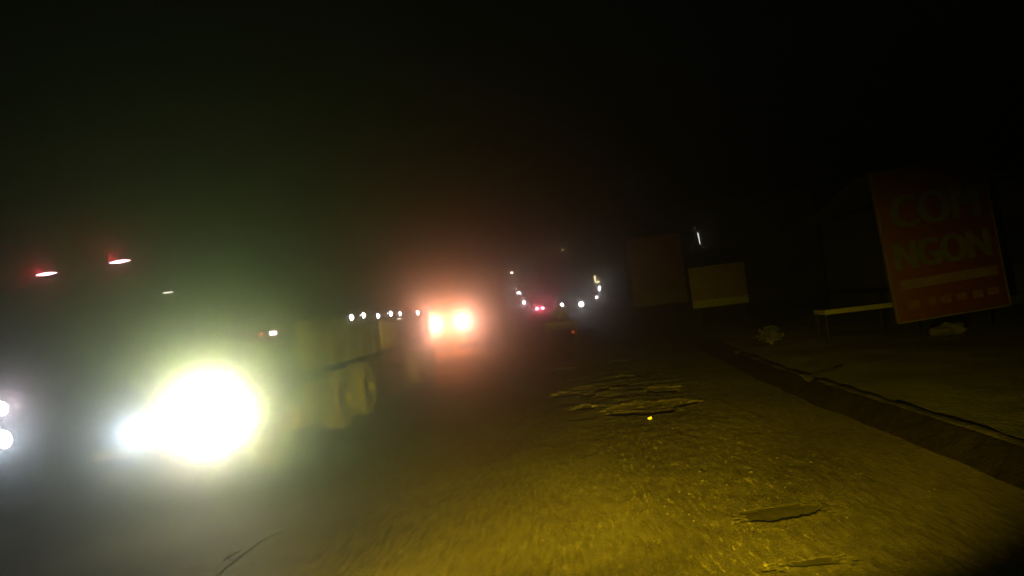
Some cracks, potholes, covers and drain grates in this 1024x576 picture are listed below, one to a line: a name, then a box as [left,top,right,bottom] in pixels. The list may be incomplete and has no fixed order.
pothole [762,553,858,572]
pothole [730,501,836,526]
crack [216,532,279,576]
pothole [640,385,686,395]
pothole [564,403,604,412]
pothole [595,397,708,418]
pothole [545,384,620,399]
